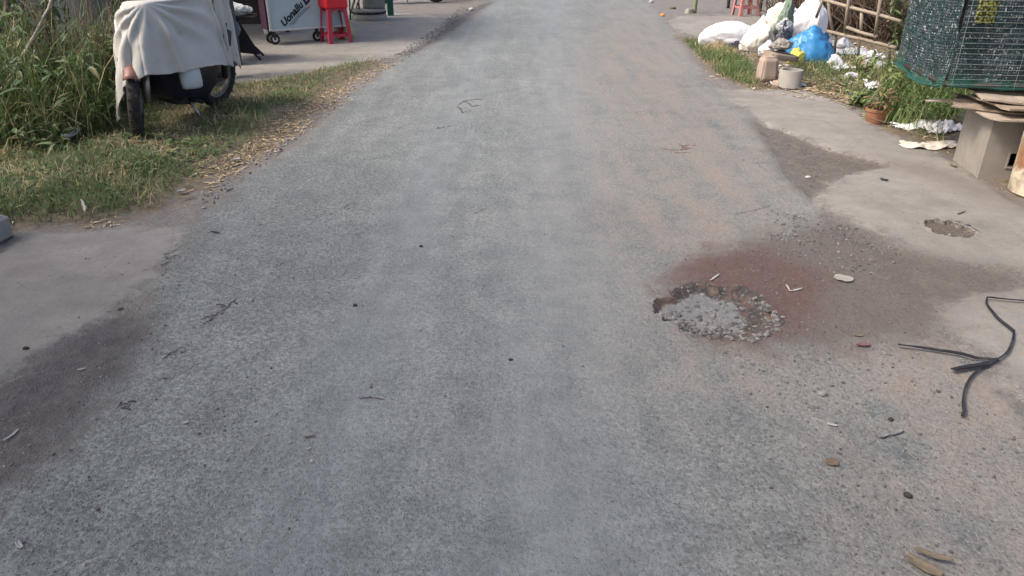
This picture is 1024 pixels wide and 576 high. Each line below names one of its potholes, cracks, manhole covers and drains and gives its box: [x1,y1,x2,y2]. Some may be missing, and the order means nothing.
pothole [918,218,981,240]
pothole [640,278,797,350]
